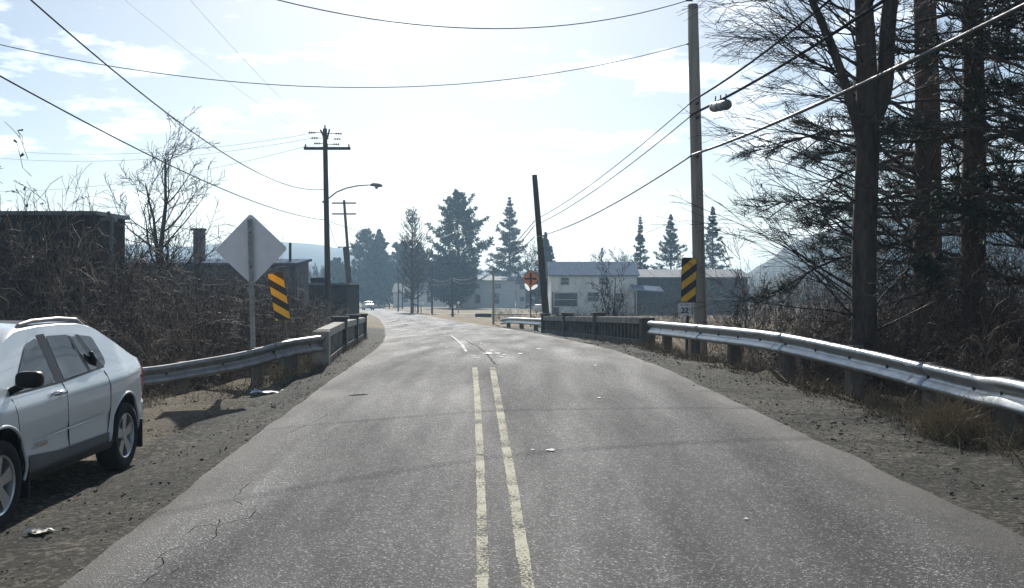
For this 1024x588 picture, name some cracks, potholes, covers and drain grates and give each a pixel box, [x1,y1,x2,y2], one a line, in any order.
crack [143,484,255,584]
